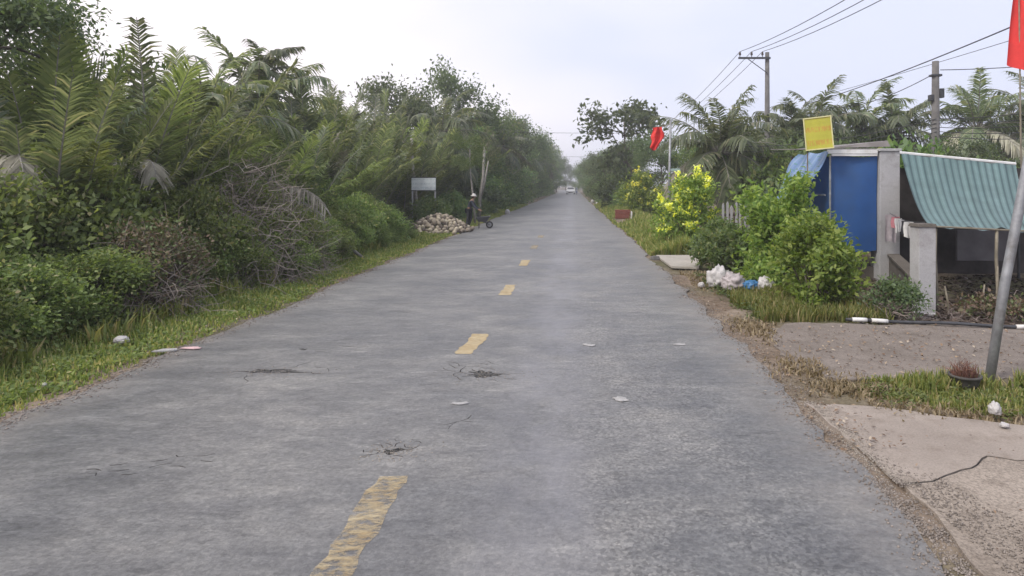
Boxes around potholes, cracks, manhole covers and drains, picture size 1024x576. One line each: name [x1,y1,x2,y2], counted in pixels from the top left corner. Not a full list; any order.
pothole [466,370,502,378]
crack [87,454,212,476]
crack [364,439,421,457]
